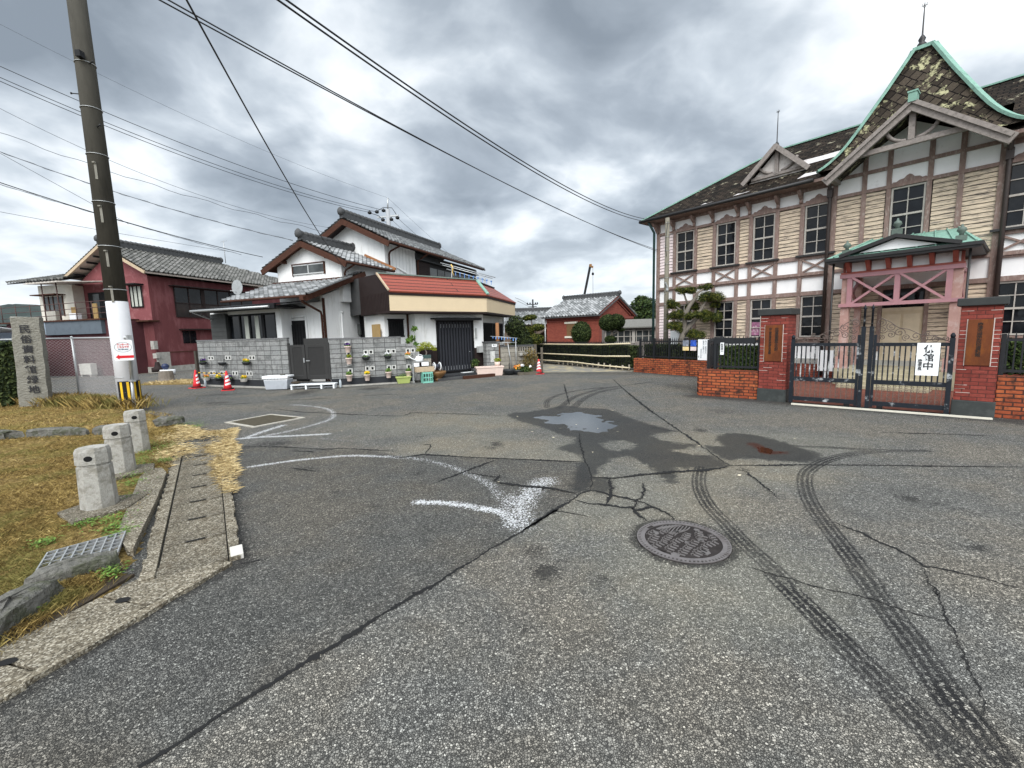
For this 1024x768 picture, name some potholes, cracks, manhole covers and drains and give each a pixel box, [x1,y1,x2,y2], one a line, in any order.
manhole cover [637,521,732,565]
crack [432,432,776,521]
crack [831,521,1023,763]
crack [751,567,945,621]
drain grate [35,531,126,571]
